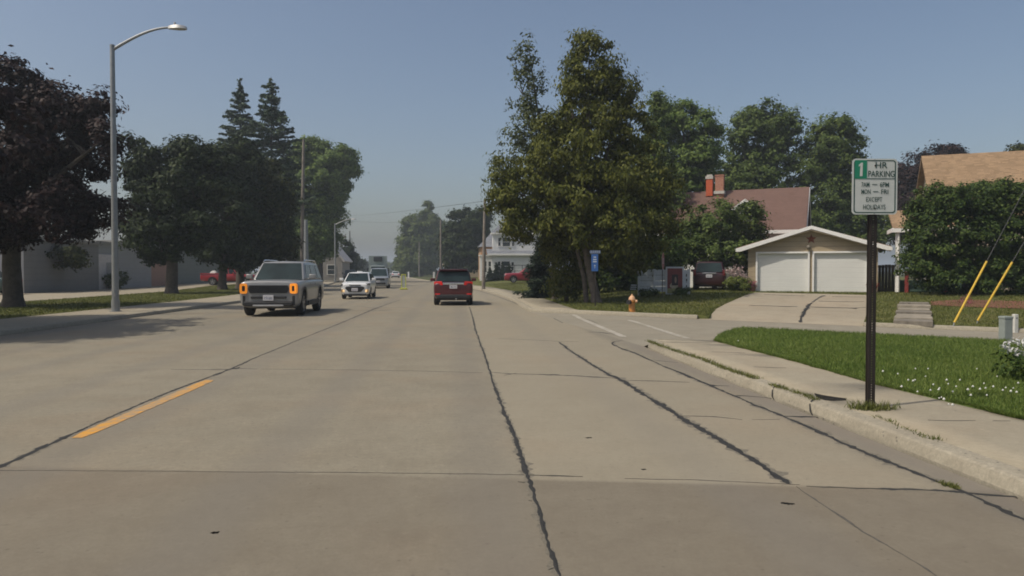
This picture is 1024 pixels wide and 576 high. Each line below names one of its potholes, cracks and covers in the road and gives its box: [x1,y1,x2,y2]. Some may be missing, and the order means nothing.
crack [469,307,937,576]
